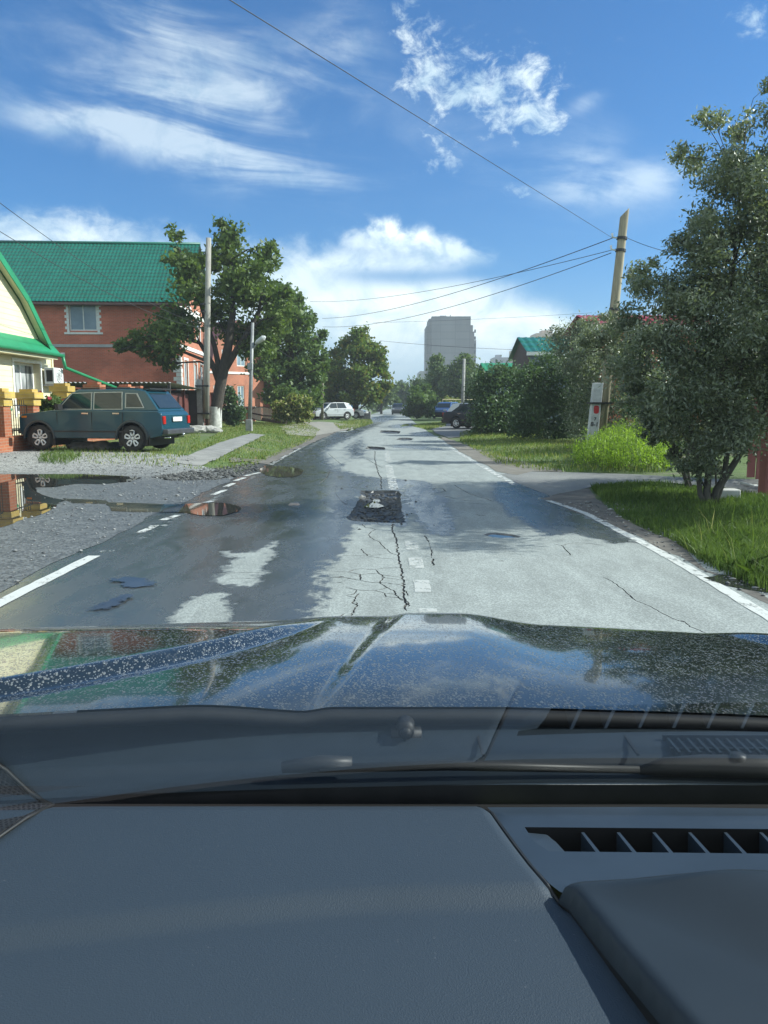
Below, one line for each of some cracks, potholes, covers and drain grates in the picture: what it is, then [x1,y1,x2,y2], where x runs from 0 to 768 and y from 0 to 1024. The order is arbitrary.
crack [335,523,435,616]
crack [603,577,705,633]
pothole [347,490,406,523]
crack [316,451,467,515]
